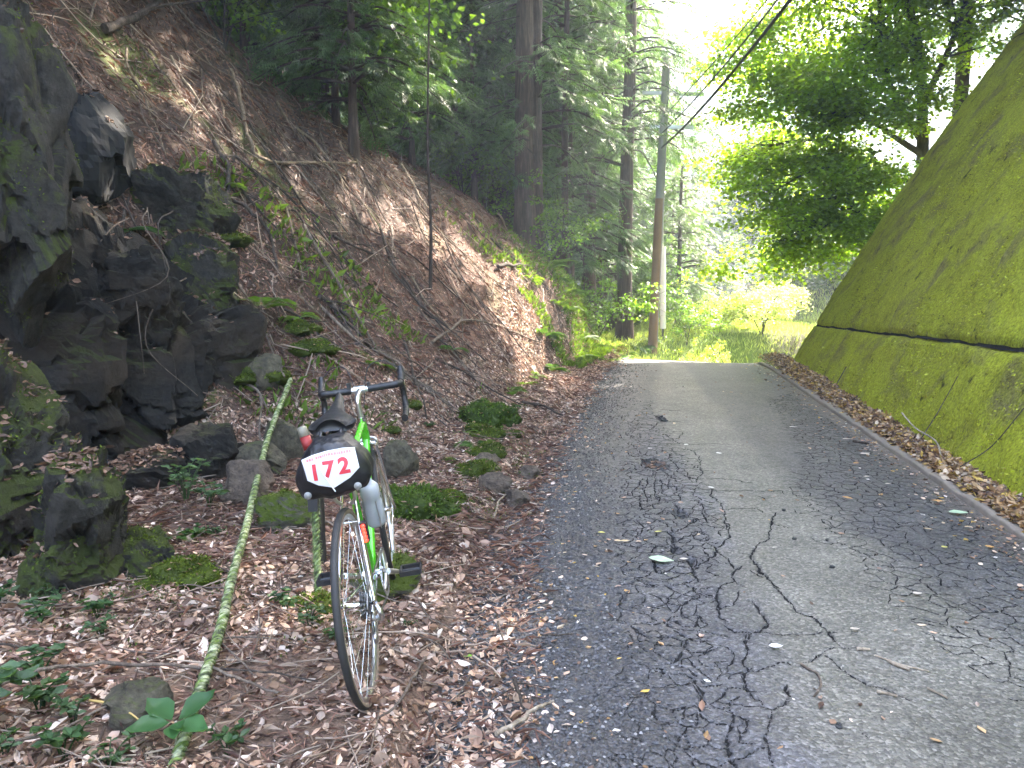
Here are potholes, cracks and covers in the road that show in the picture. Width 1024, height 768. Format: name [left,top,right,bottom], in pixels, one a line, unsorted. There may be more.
crack [770,395,1024,701]
crack [606,401,916,768]
pothole [642,457,670,471]
